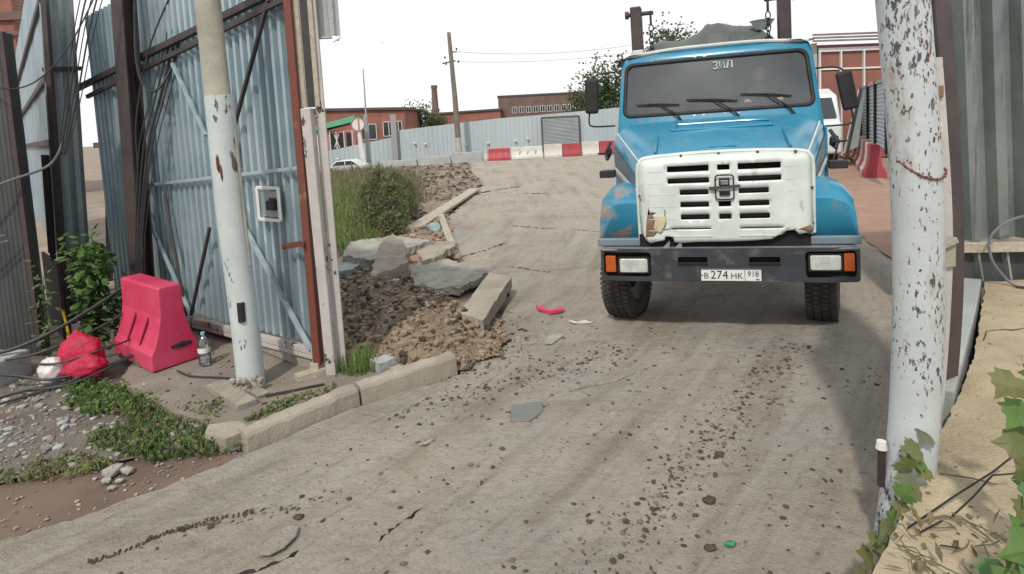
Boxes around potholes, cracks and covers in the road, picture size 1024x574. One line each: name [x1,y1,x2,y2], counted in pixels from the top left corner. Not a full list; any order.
crack [983,328,1024,341]
crack [238,550,299,574]
crack [379,508,422,542]
crack [464,225,556,256]
